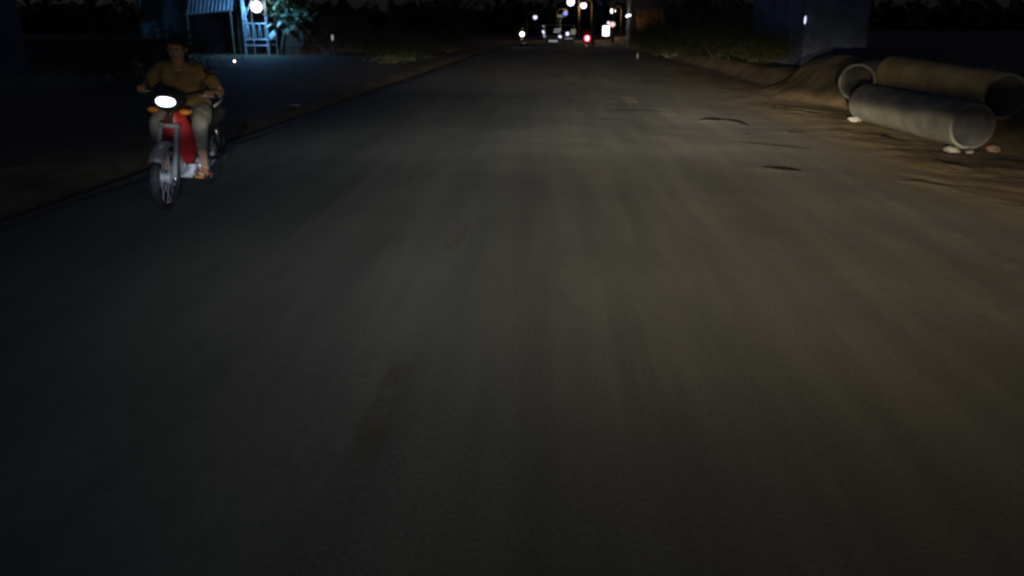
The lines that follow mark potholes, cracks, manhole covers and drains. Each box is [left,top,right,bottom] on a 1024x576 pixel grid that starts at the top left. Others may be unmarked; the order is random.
pothole [697,117,749,126]
